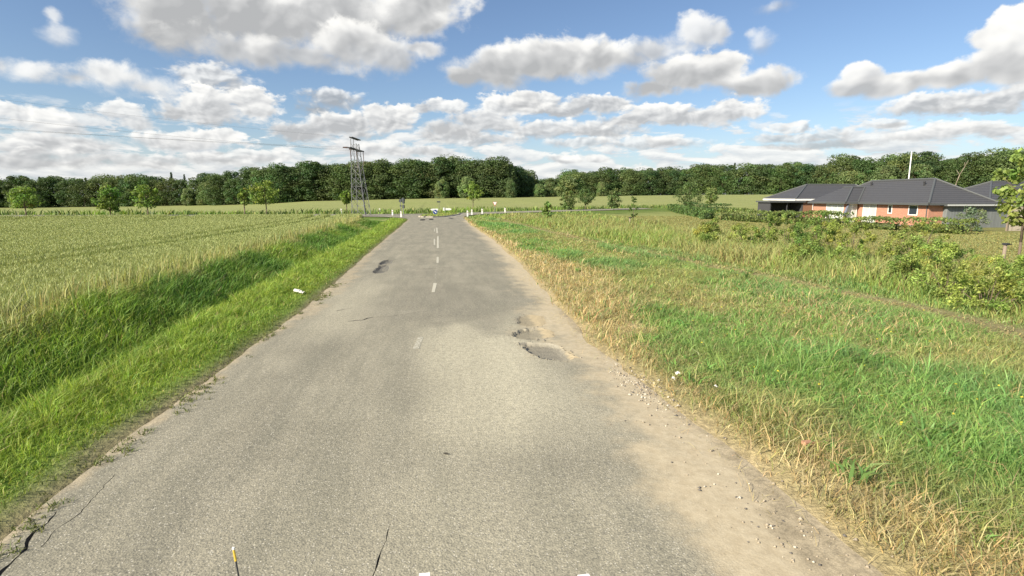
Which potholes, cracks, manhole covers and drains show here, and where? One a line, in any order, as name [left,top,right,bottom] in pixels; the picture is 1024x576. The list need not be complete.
pothole [373,259,394,274]
pothole [511,327,555,341]
crack [372,526,390,576]
crack [0,476,114,576]
pothole [514,342,579,362]
pothole [514,314,546,327]
